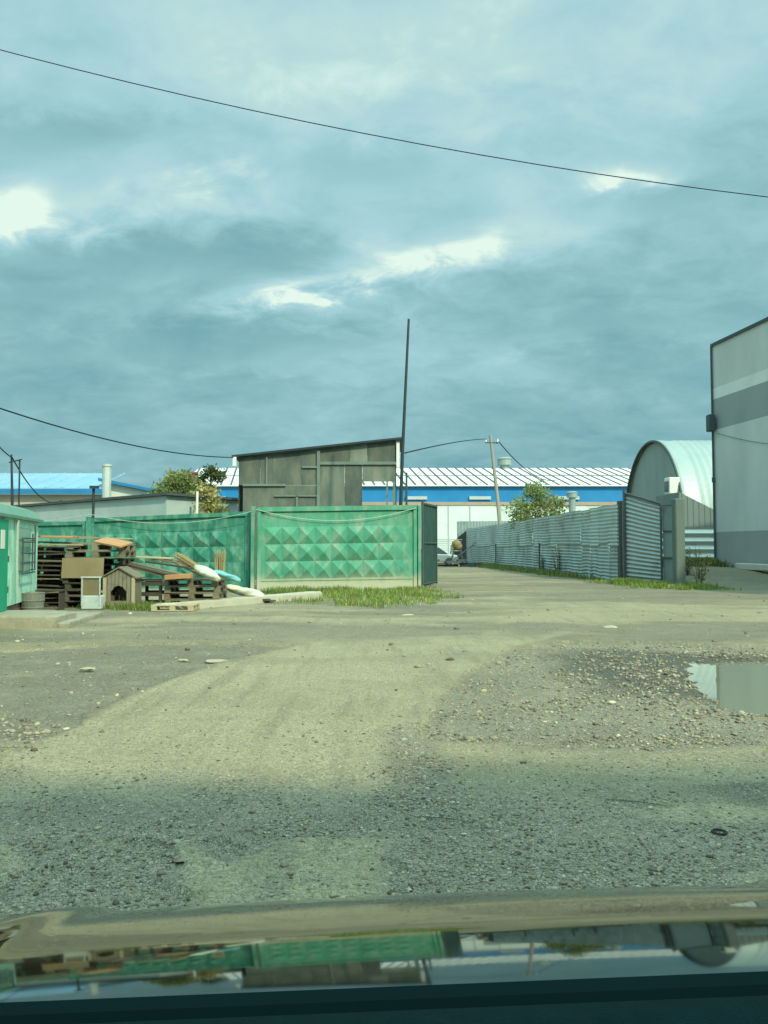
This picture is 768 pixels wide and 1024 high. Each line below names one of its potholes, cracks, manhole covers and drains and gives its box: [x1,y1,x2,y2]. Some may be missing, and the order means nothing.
pothole [396,638,768,758]
